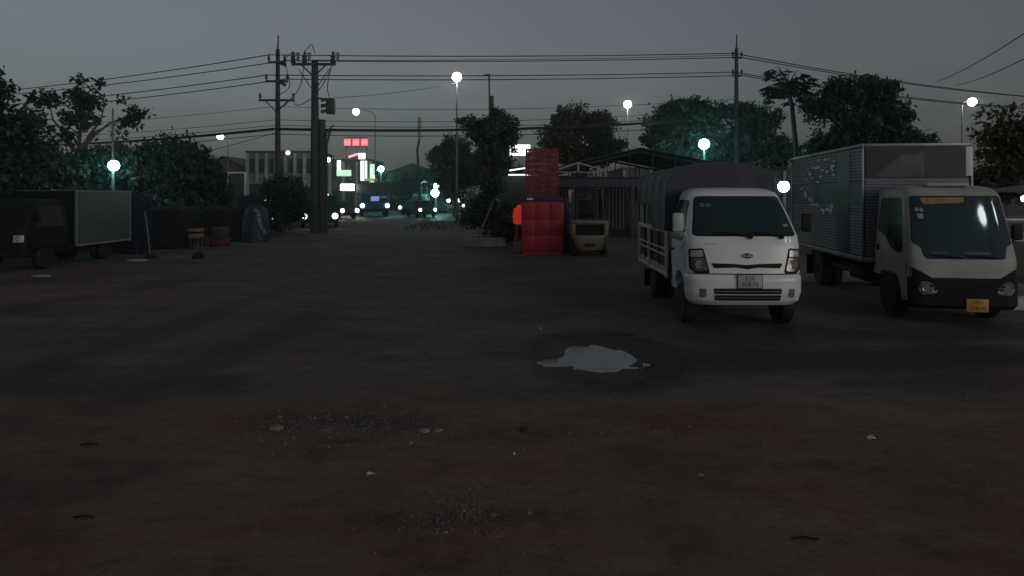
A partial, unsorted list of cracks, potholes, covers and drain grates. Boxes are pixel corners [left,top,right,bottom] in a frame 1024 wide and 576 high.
pothole [527,331,694,391]
